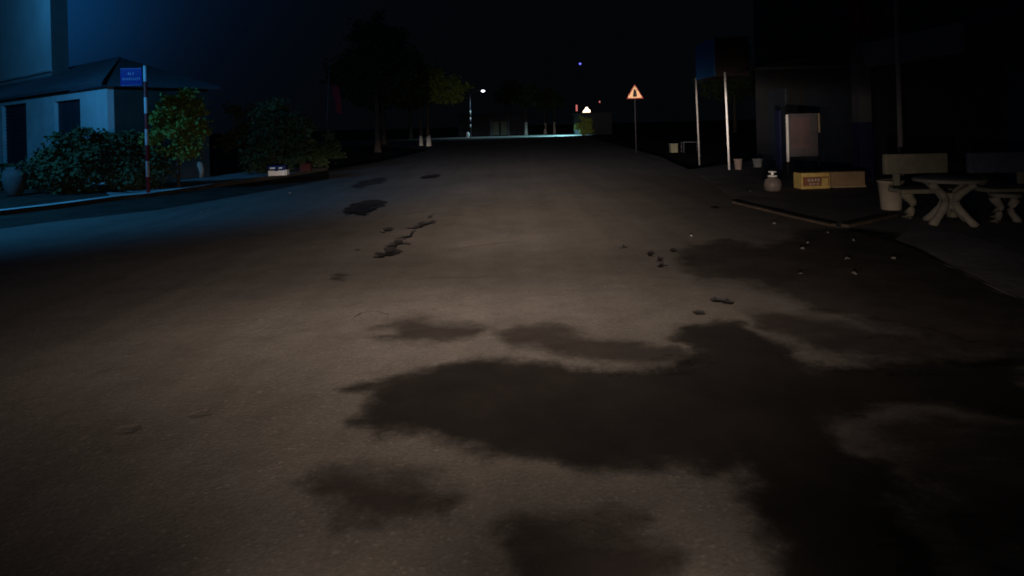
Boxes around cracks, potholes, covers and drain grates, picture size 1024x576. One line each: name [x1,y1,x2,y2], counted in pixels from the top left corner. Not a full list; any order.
pothole [407,220,436,229]
pothole [710,296,734,304]
pothole [385,239,412,247]
pothole [342,200,388,216]
pothole [373,246,404,258]
